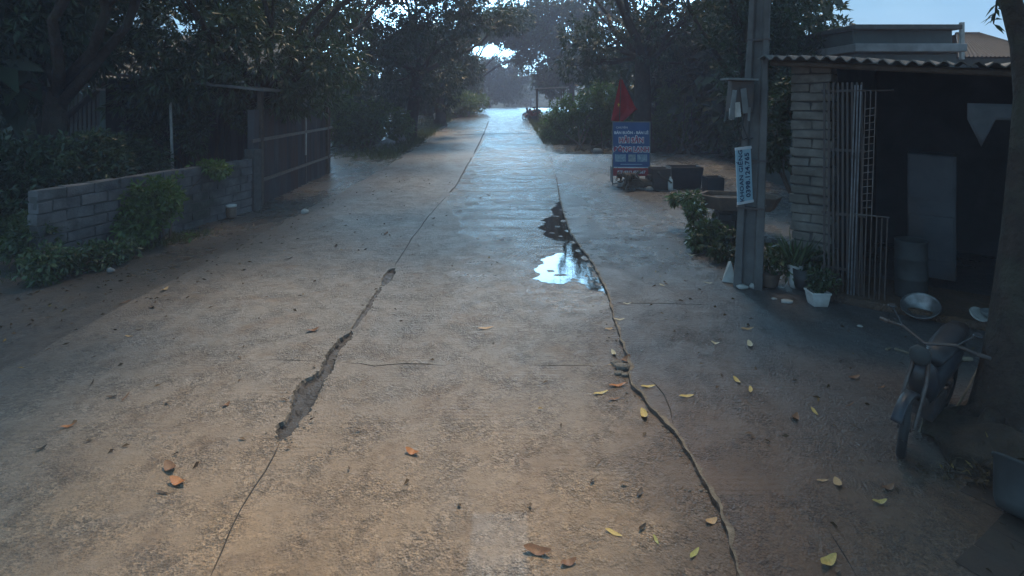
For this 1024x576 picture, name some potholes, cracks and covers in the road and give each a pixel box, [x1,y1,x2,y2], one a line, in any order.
crack [210,442,280,576]
crack [351,287,382,329]
crack [644,376,673,423]
